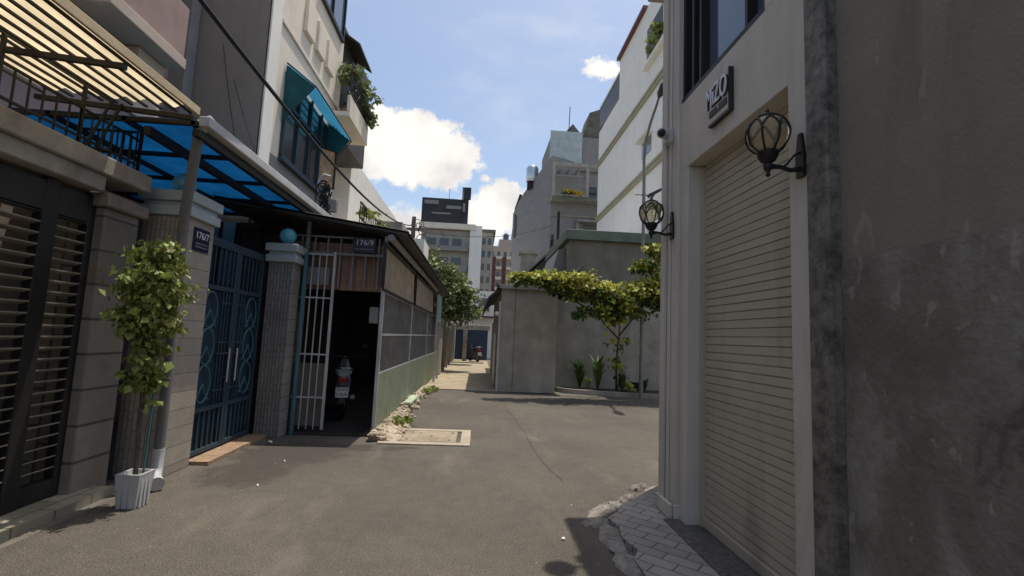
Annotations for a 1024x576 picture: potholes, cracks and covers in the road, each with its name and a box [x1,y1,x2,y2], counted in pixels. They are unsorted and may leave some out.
manhole cover [376,428,471,447]
crack [504,402,562,480]
